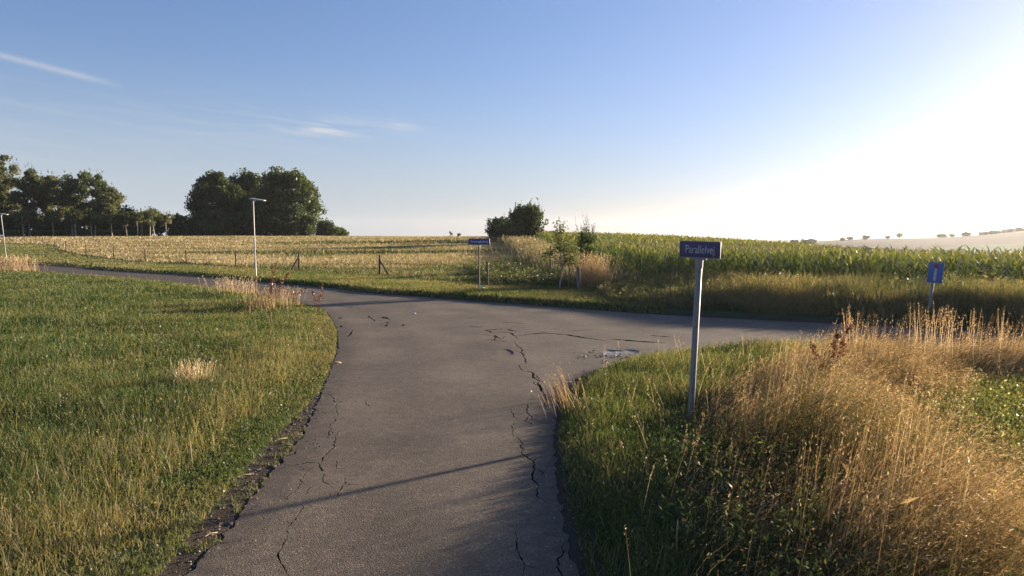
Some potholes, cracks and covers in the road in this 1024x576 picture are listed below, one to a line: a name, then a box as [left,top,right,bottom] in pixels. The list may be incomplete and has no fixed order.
crack [481,323,665,504]
crack [277,395,346,574]
